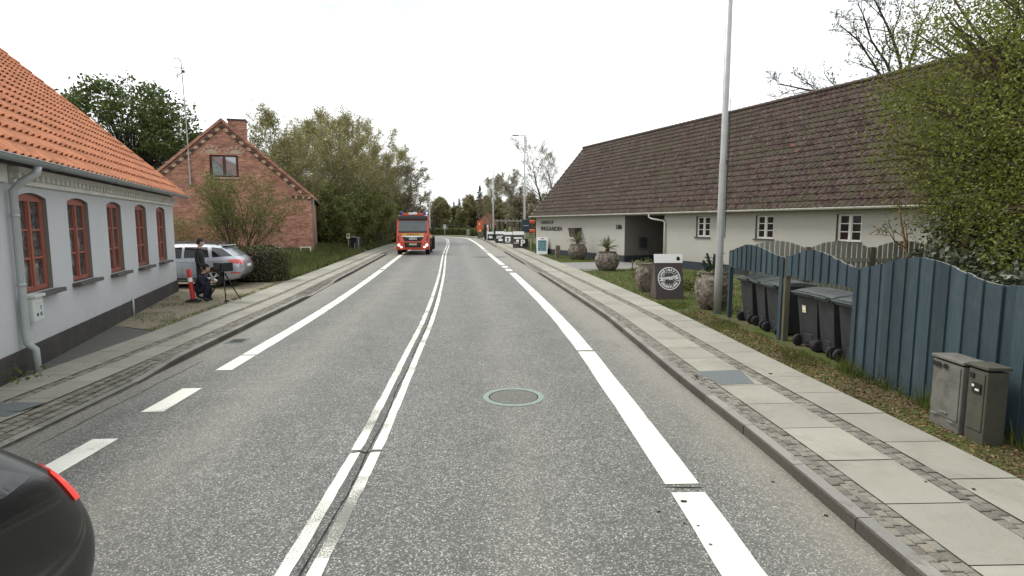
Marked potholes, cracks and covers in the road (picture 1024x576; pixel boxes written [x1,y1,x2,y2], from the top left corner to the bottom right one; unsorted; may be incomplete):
manhole cover [483,388,544,407]
